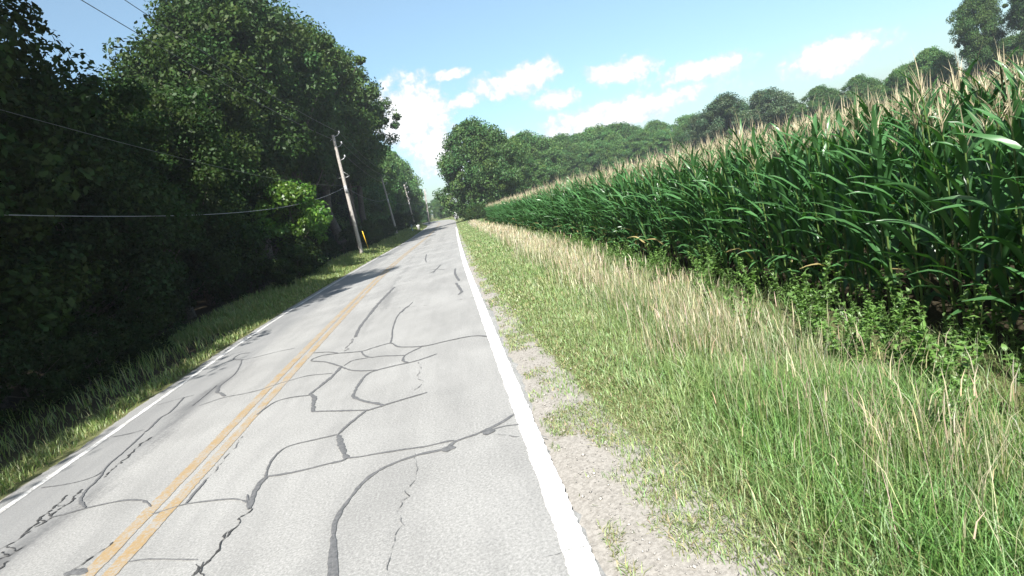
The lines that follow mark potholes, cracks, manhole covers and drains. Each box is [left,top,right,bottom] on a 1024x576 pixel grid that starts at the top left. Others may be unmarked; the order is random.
crack [63,542,113,576]
crack [0,395,192,569]
crack [386,453,418,570]
